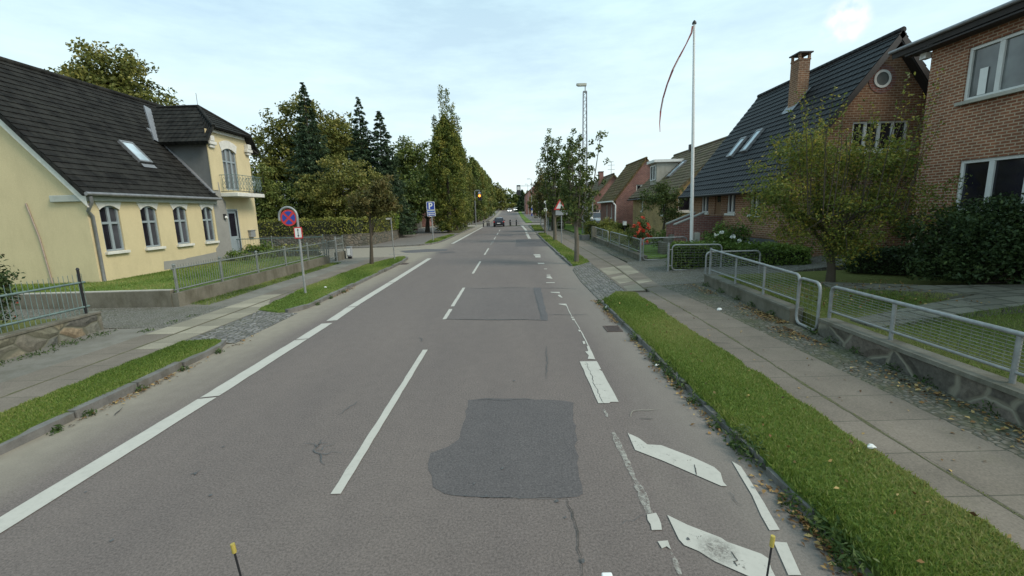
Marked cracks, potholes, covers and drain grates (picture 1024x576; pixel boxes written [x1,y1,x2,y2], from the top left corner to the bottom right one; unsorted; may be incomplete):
crack [306,439,341,464]
crack [567,499,583,576]
